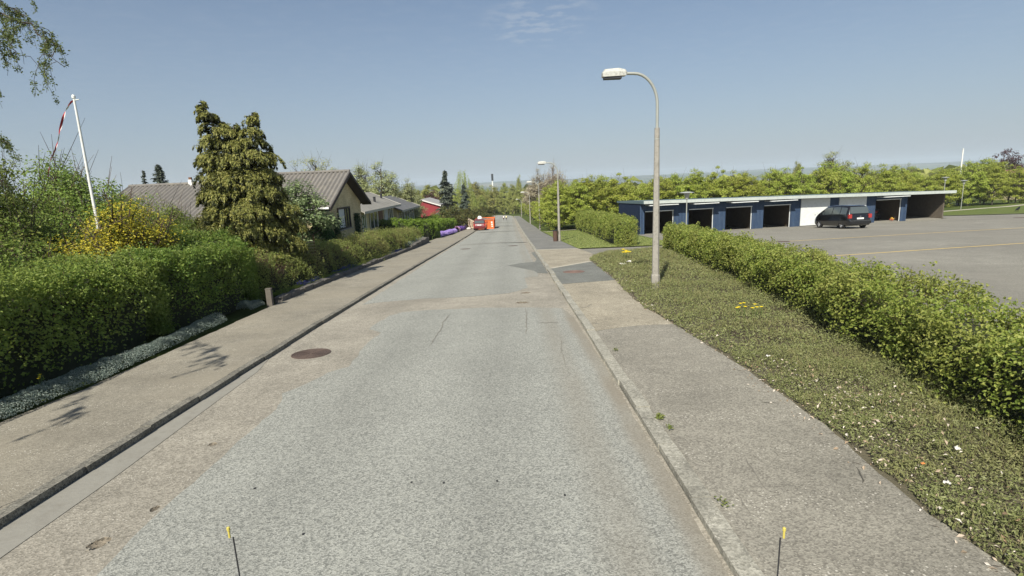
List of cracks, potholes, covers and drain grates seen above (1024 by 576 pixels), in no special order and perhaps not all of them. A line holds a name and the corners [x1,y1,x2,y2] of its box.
manhole cover [291,348,331,359]
pothole [86,536,111,551]
